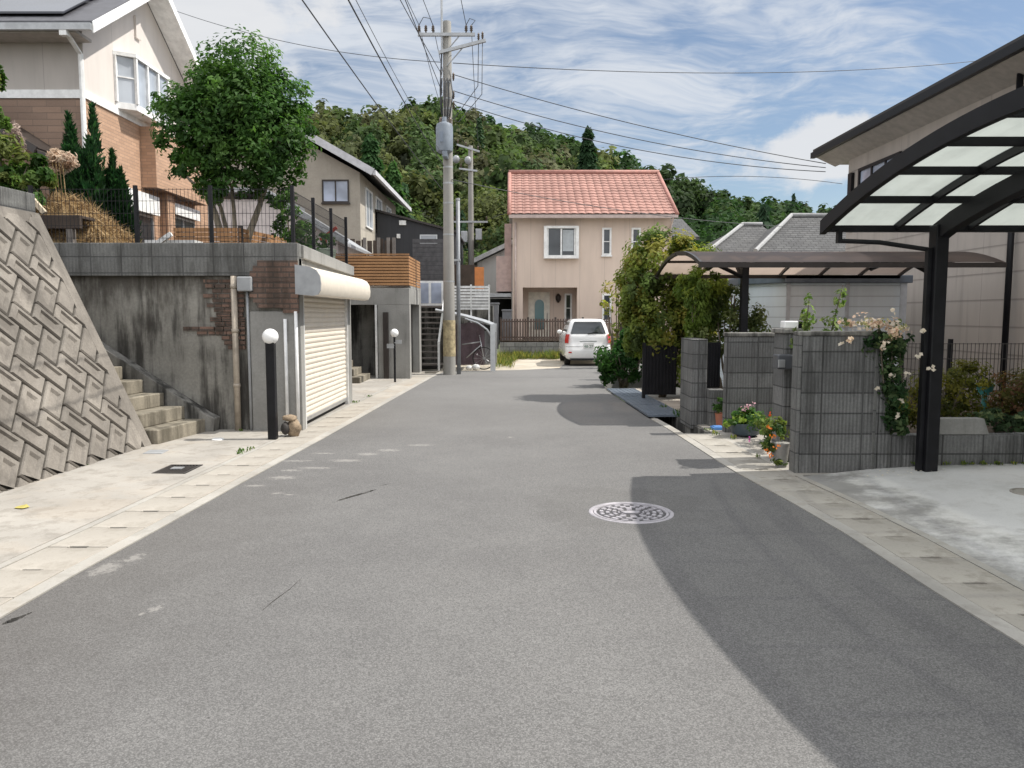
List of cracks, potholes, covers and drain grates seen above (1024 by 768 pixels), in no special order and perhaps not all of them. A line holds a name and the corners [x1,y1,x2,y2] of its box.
manhole cover [589,502,674,524]
